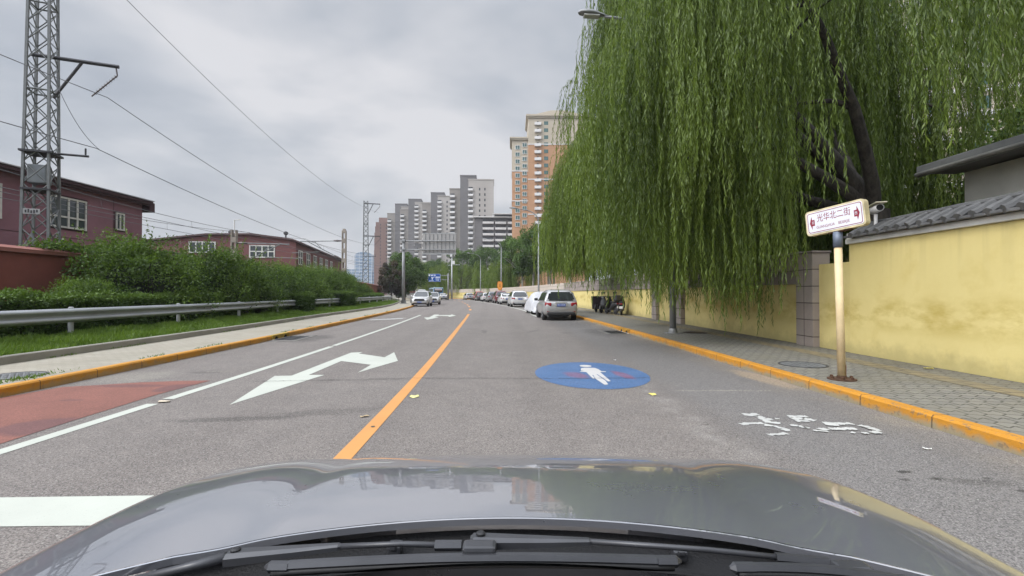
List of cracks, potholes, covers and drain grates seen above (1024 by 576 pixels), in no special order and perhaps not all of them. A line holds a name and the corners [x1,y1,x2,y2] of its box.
drain grate [268,332,317,341]
drain grate [597,327,632,335]
